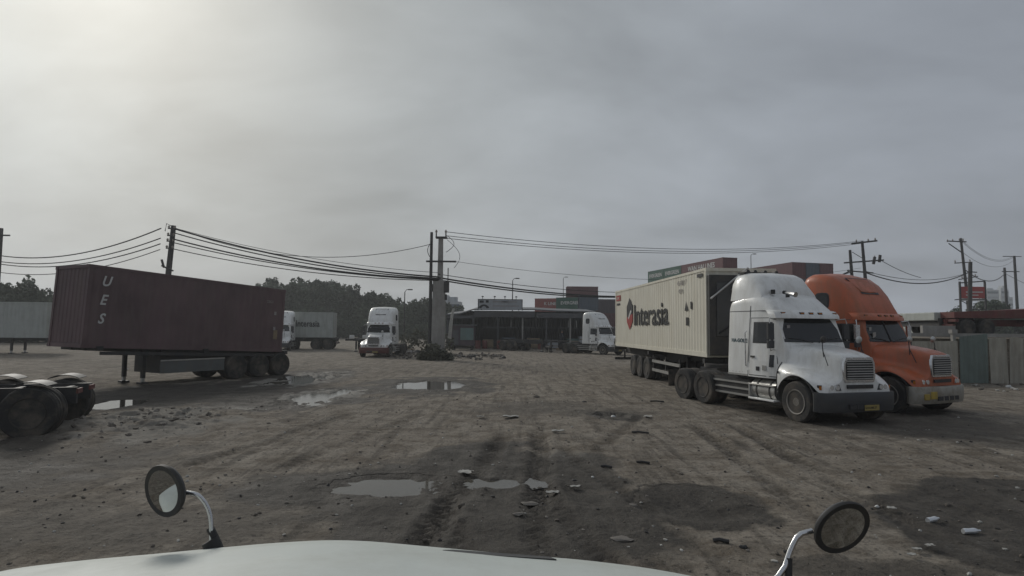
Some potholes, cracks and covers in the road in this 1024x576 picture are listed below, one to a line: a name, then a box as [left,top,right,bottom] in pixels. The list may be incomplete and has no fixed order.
pothole [313,473,459,500]
pothole [391,381,468,390]
